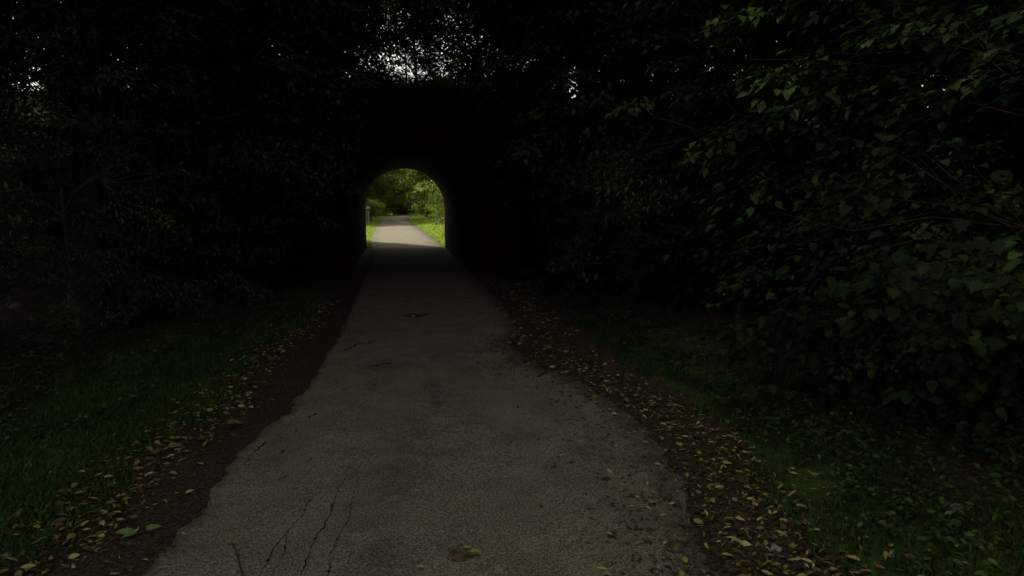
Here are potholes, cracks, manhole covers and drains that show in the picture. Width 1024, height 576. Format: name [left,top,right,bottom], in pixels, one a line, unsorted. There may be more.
crack [259,473,370,576]
